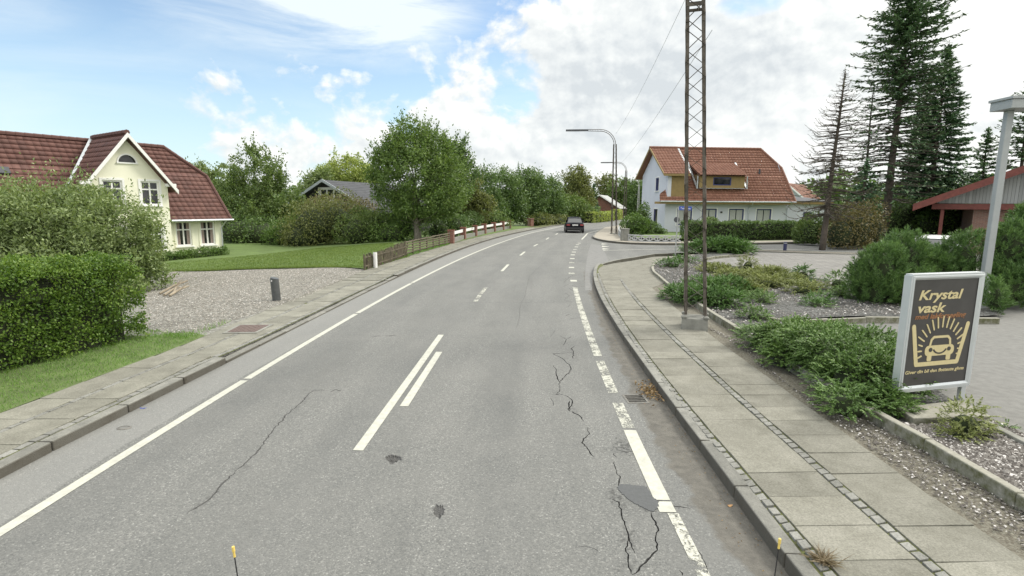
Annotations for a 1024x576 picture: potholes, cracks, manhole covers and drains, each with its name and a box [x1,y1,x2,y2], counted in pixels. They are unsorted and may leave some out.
crack [612,454,708,575]
crack [190,389,341,511]
pothole [433,504,445,519]
manhole cover [222,324,274,334]
crack [550,275,593,456]
drain grate [622,394,650,404]
